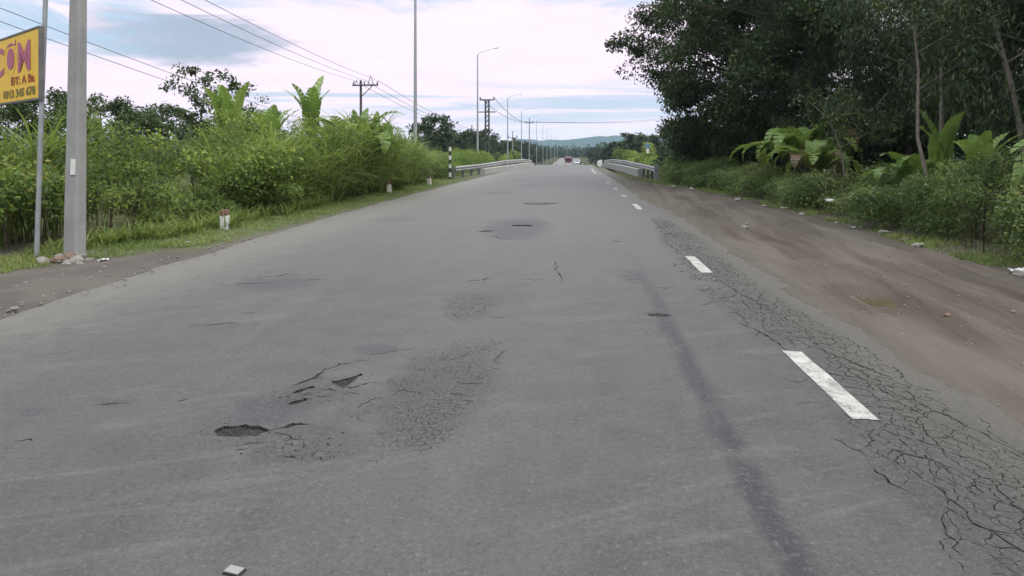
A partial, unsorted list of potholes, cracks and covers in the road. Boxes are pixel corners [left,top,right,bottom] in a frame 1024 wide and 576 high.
crack [450,262,563,320]
crack [652,218,1024,576]
crack [275,337,505,464]
crack [230,274,328,285]
pothole [331,374,362,389]
pothole [214,424,270,437]
